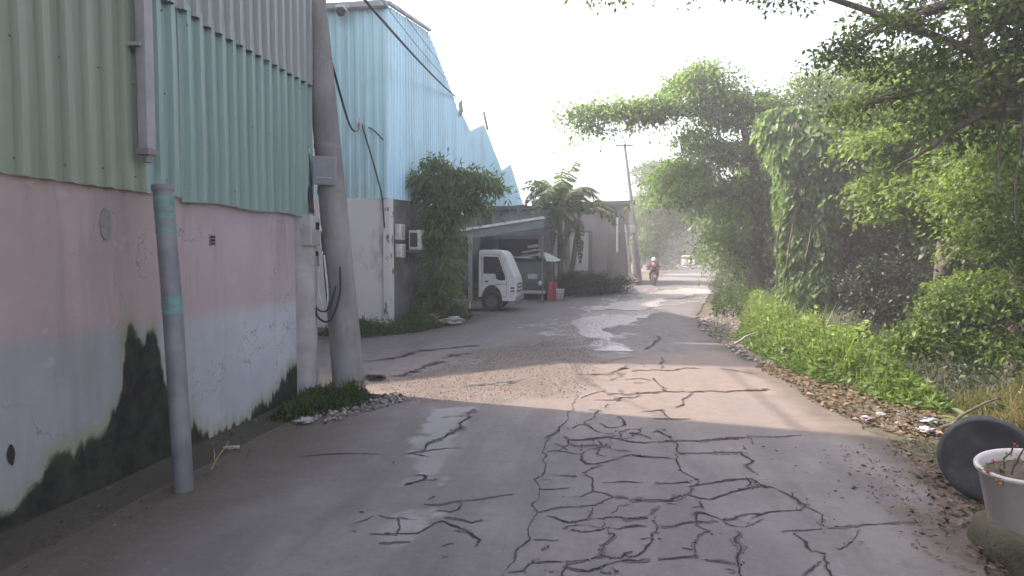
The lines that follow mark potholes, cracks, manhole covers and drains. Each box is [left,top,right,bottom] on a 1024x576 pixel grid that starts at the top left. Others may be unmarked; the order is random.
crack [502,336,923,576]
crack [363,345,480,377]
crack [352,409,512,557]
